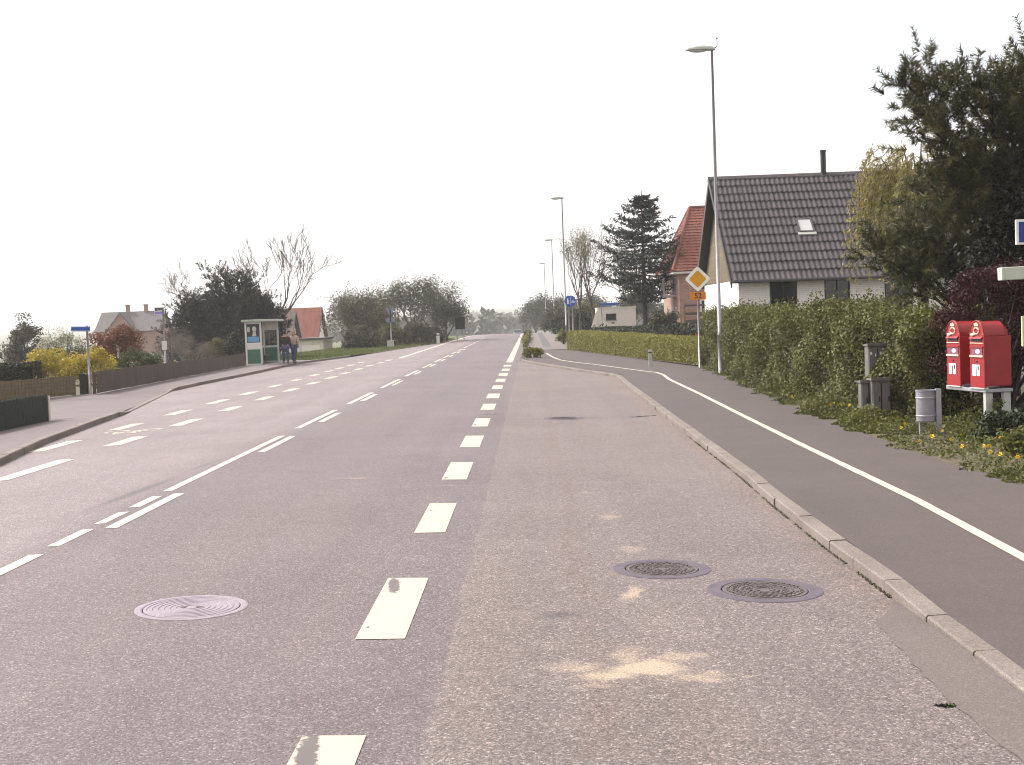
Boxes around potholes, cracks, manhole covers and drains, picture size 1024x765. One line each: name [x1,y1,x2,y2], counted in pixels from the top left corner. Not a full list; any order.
manhole cover [134,595,248,621]
manhole cover [707,578,824,603]
manhole cover [613,559,711,579]
